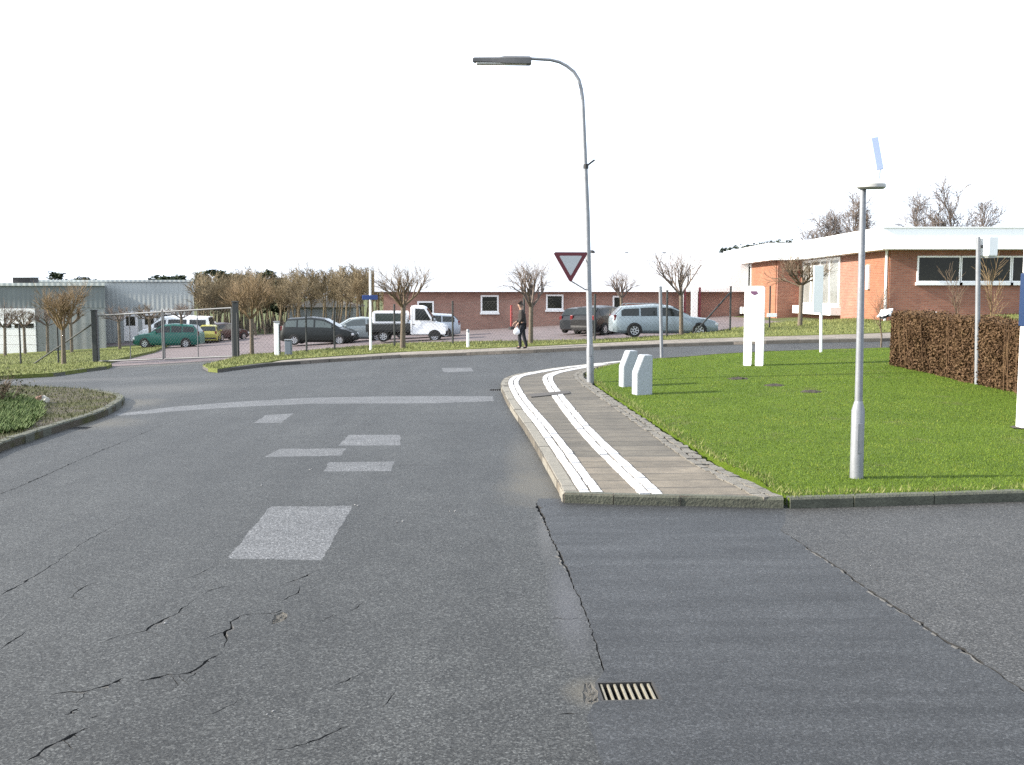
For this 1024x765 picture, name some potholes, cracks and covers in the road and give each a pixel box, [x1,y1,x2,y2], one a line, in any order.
crack [536,505,604,671]
crack [278,726,348,750]
drain grate [595,681,663,701]
crack [27,569,319,761]
